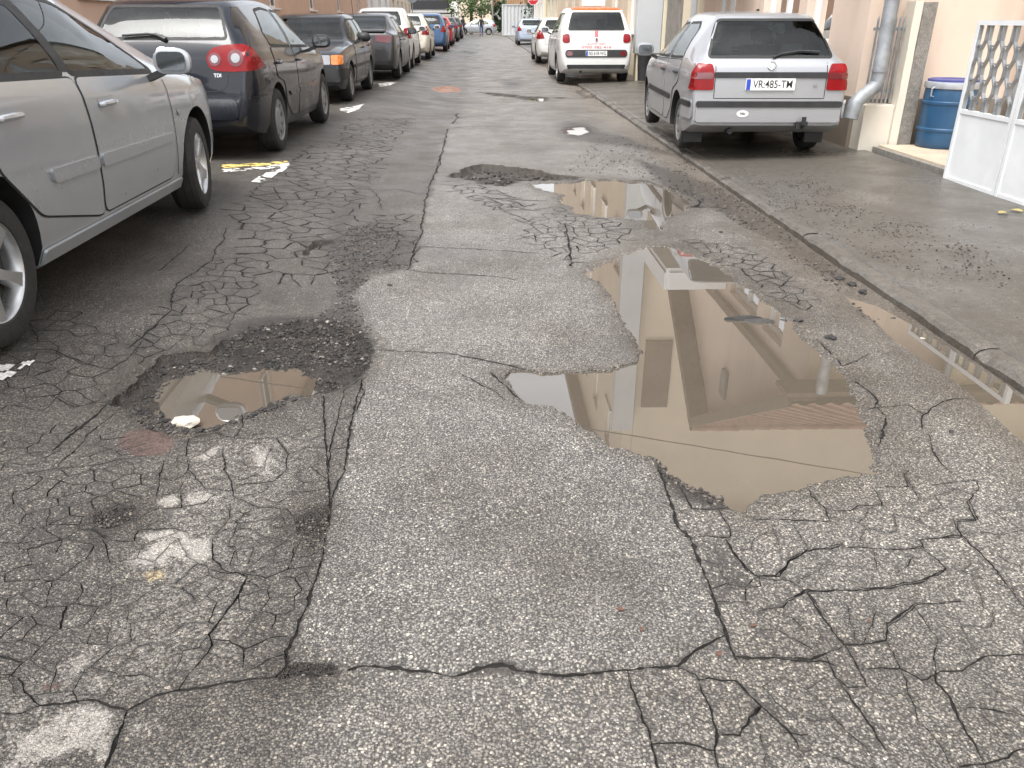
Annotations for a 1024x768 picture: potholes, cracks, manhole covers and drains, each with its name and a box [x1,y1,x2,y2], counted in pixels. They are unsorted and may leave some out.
pothole [105,320,376,432]
pothole [505,244,886,515]
crack [0,311,1024,768]
pothole [446,164,584,186]
crack [11,114,636,369]
pothole [526,179,693,232]
